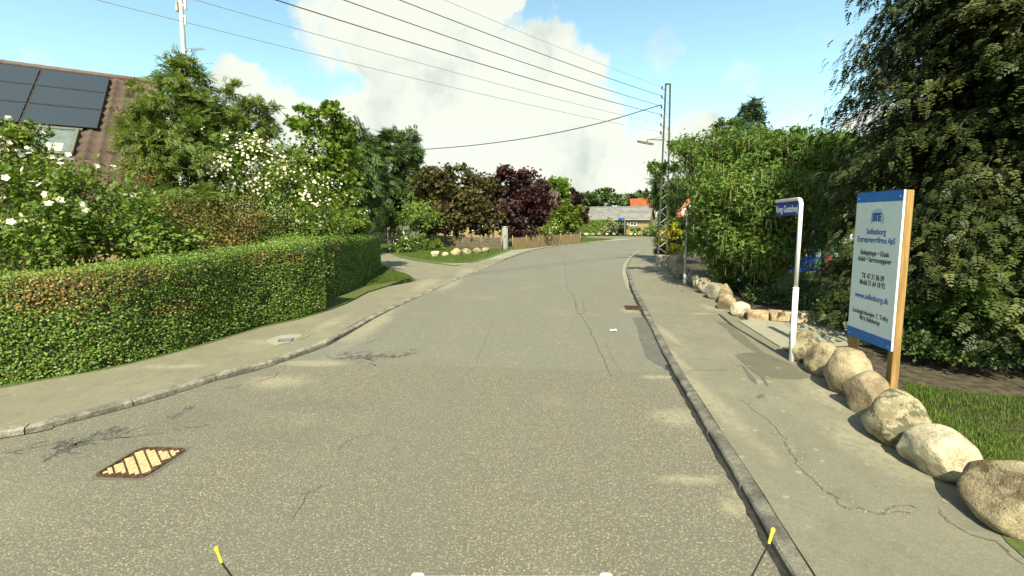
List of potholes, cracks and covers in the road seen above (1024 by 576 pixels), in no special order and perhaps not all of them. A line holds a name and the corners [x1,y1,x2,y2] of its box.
crack [0,424,210,454]
crack [741,400,917,515]
crack [328,340,418,365]
